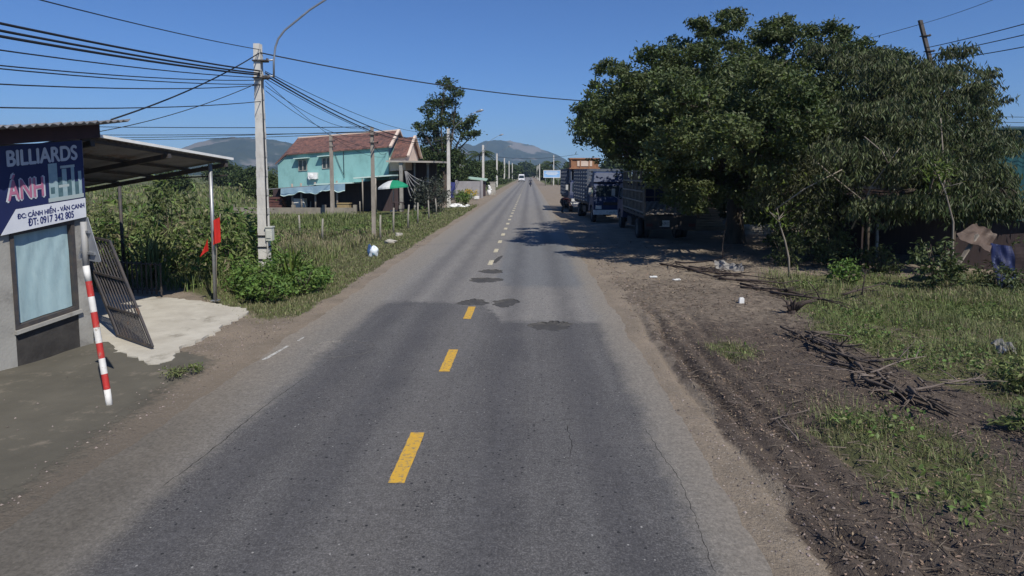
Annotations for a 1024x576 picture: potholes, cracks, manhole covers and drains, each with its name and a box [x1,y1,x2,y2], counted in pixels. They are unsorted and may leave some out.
pothole [456,298,489,306]
pothole [492,299,520,308]
crack [167,377,306,483]
pothole [527,320,572,331]
crack [646,431,715,571]
